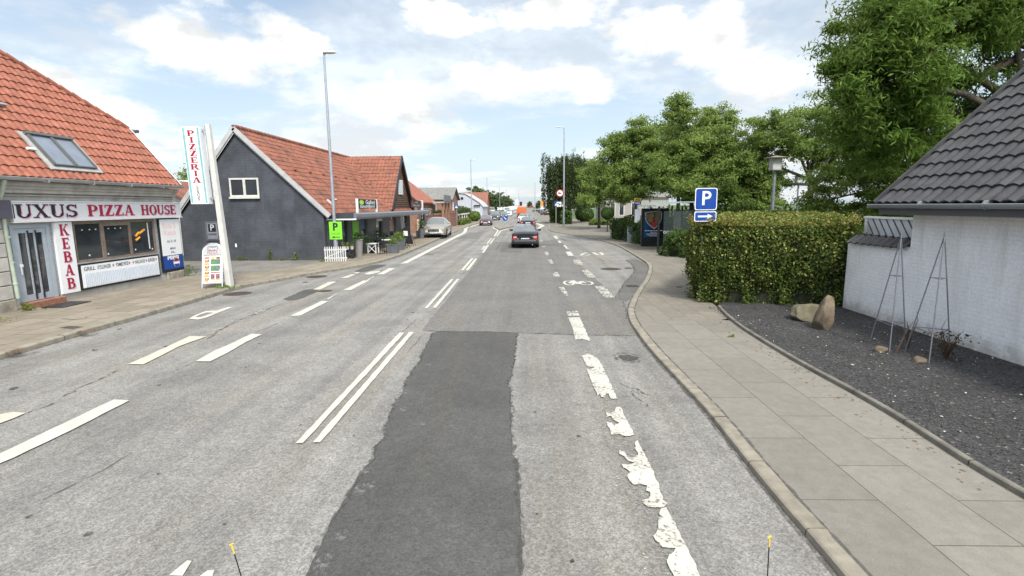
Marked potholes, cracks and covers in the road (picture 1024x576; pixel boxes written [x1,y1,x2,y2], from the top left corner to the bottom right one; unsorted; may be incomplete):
crack [45,453,131,499]
